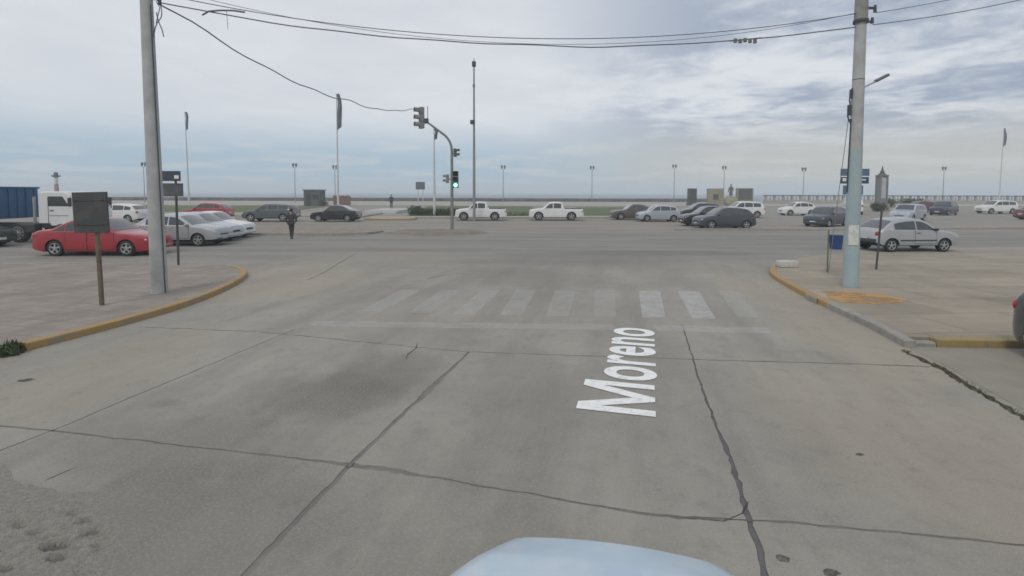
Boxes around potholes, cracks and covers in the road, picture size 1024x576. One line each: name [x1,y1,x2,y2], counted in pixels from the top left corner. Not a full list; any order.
crack [0,330,1024,547]
